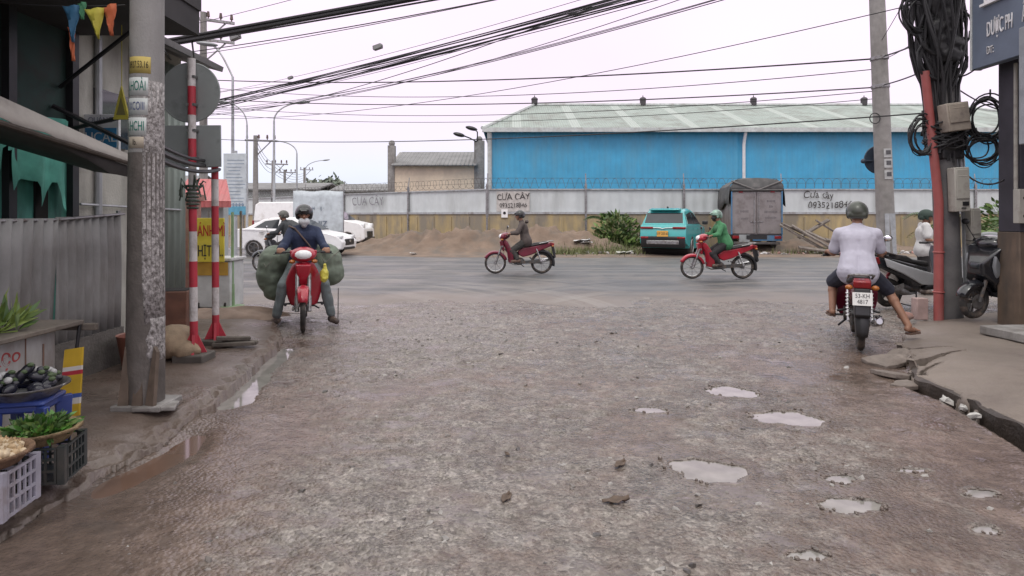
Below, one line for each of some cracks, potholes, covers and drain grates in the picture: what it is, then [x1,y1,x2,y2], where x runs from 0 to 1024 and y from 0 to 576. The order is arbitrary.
pothole [817,472,864,487]
pothole [658,455,755,486]
pothole [812,494,892,517]
pothole [956,485,1004,500]
pothole [891,466,936,475]
pothole [963,522,1009,538]
pothole [629,405,674,414]
pothole [778,545,833,564]
crack [894,342,968,376]
pothole [745,407,832,428]
pothole [699,382,765,399]
